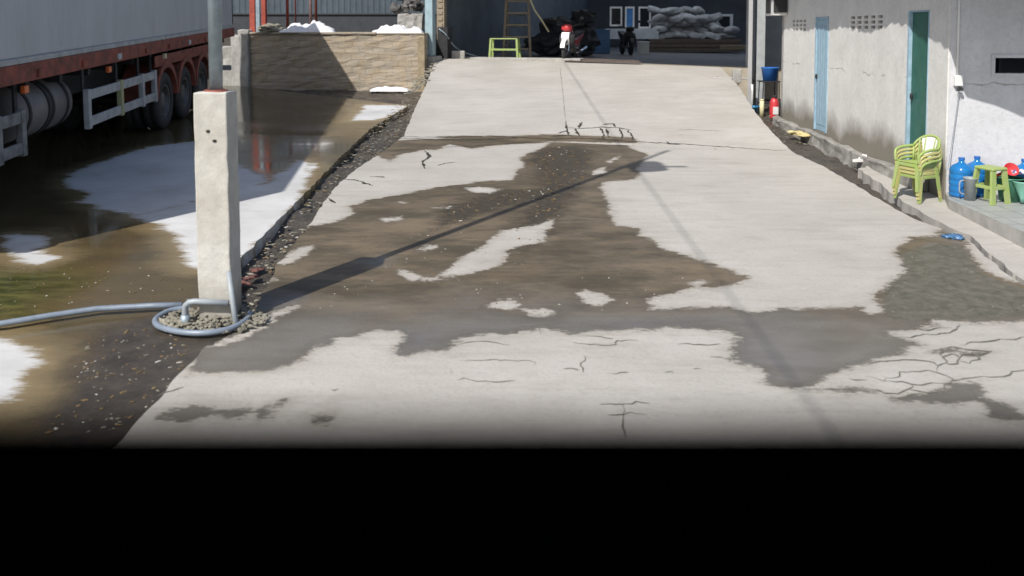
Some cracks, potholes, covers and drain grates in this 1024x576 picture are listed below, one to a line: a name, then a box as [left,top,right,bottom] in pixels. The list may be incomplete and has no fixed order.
crack [405,121,785,169]
crack [850,325,1024,394]
crack [606,401,650,417]
crack [564,335,625,372]
